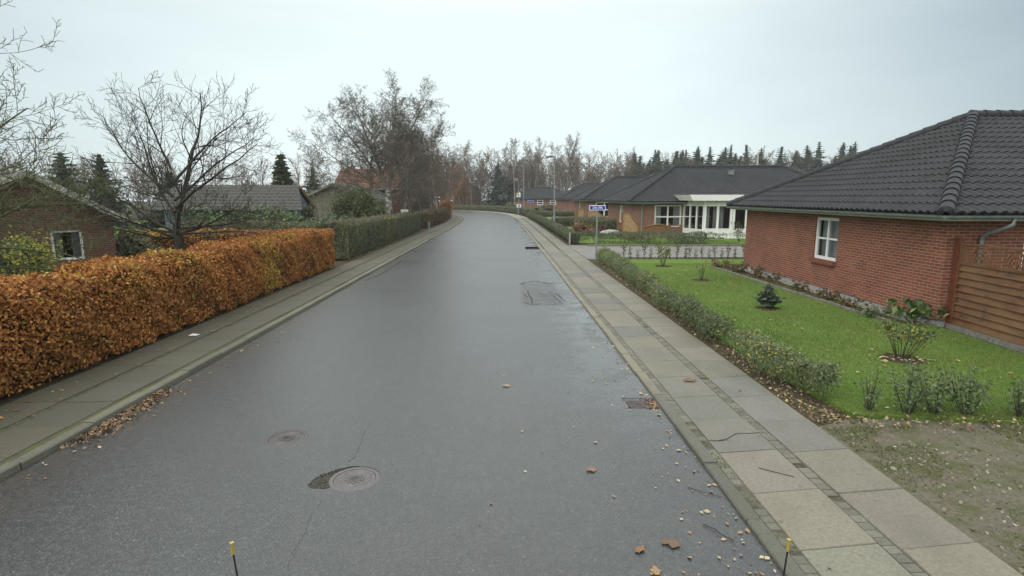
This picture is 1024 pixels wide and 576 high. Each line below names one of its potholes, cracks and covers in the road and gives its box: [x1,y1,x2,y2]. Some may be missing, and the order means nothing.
manhole cover [328,467,380,491]
drain grate [622,398,661,410]
manhole cover [264,430,308,447]
